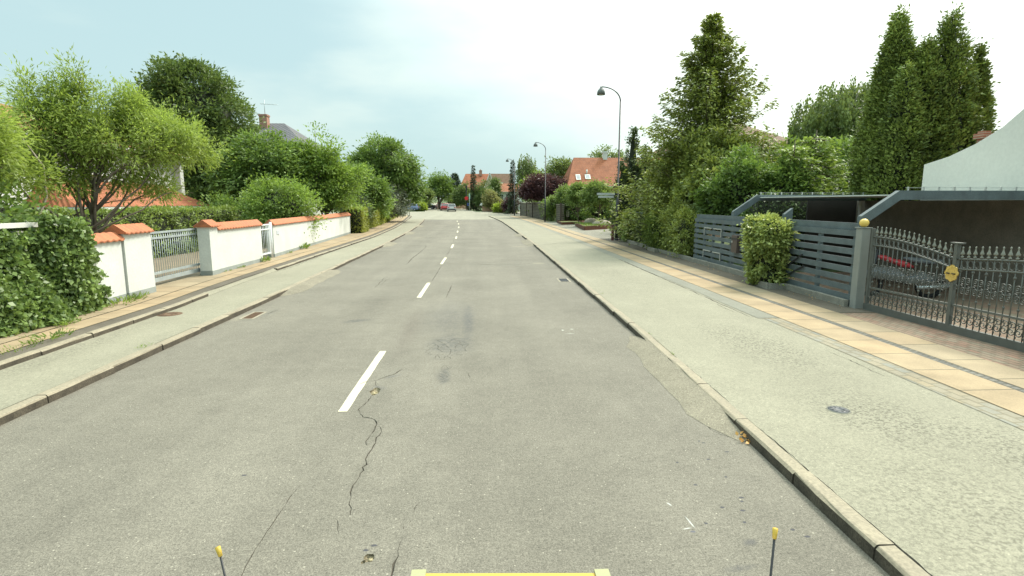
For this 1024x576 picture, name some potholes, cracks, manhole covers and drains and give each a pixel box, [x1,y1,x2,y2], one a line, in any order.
manhole cover [826,406,851,414]
crack [241,486,299,576]
crack [337,369,402,533]
